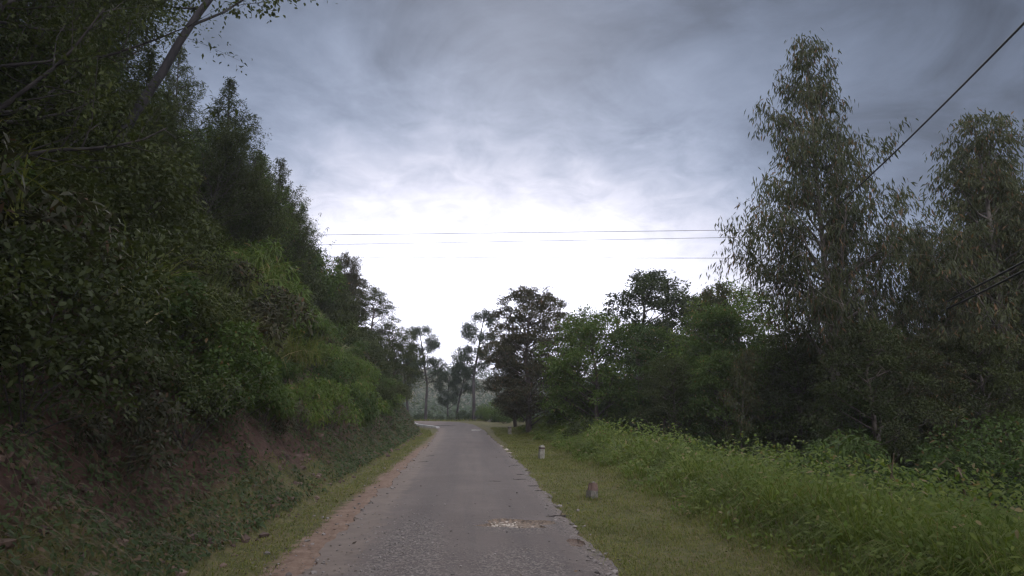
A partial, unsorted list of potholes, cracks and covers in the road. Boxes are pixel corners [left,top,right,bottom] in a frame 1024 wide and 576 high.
pothole [476,518,556,528]
